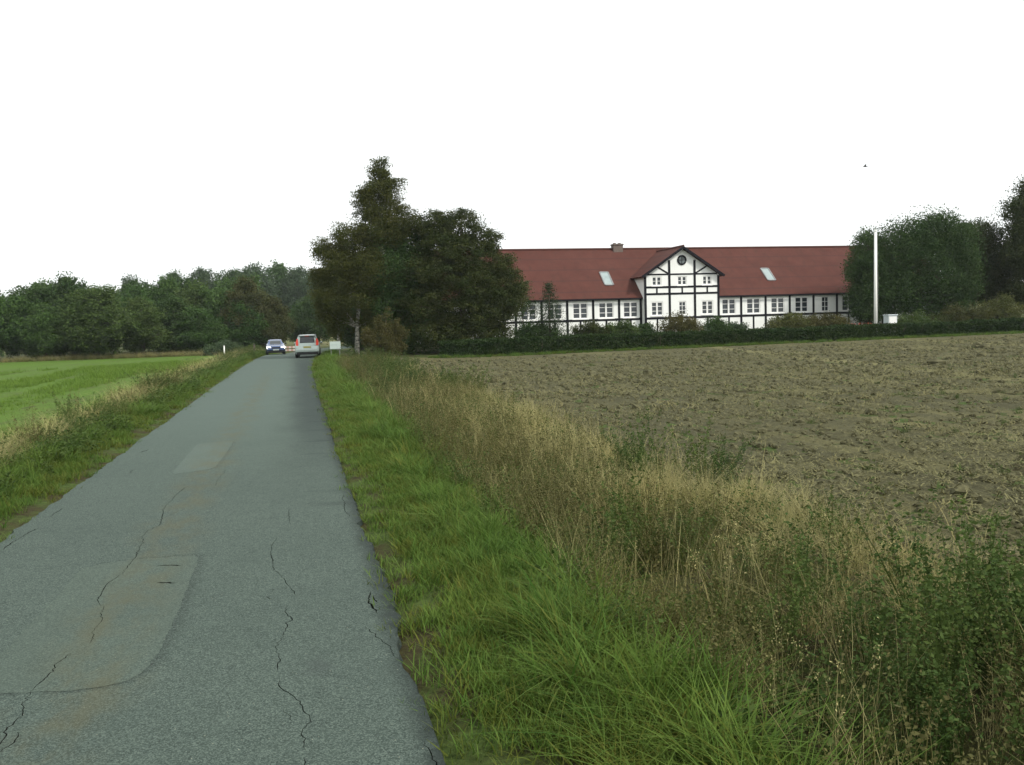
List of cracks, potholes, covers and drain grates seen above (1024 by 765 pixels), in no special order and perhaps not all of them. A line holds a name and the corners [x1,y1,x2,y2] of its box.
crack [365,591,395,657]
crack [0,486,188,750]
crack [269,509,311,765]
